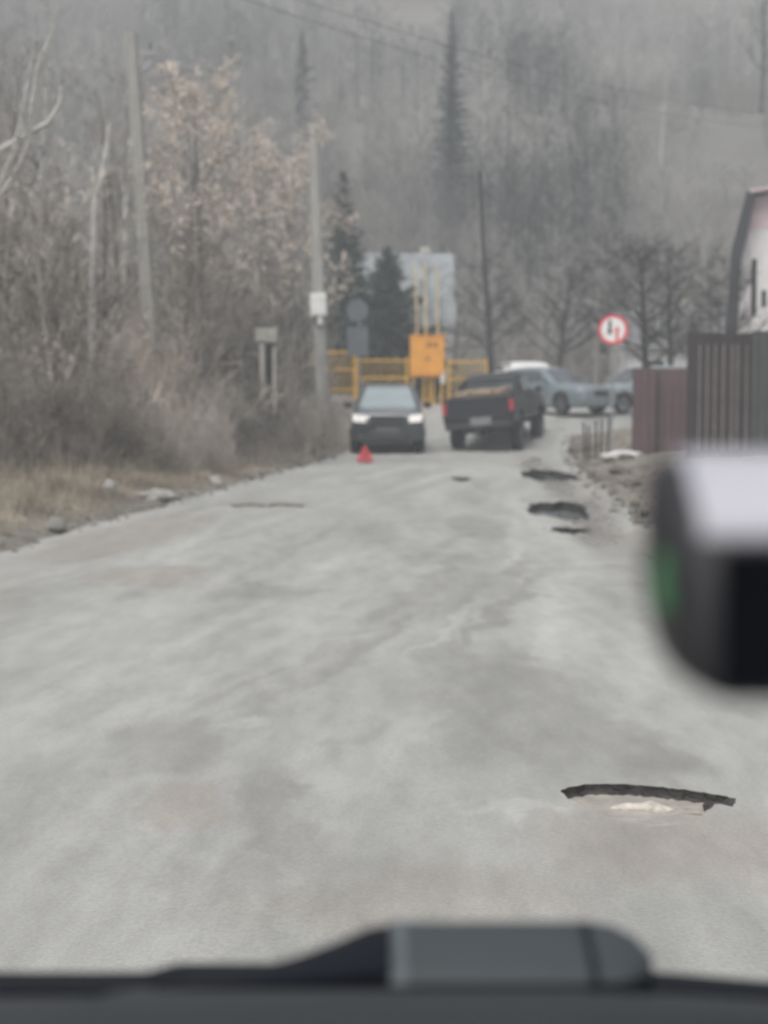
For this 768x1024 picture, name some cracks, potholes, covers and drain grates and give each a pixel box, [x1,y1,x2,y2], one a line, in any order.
pothole [561,784,736,826]
pothole [526,501,591,521]
pothole [521,469,579,481]
